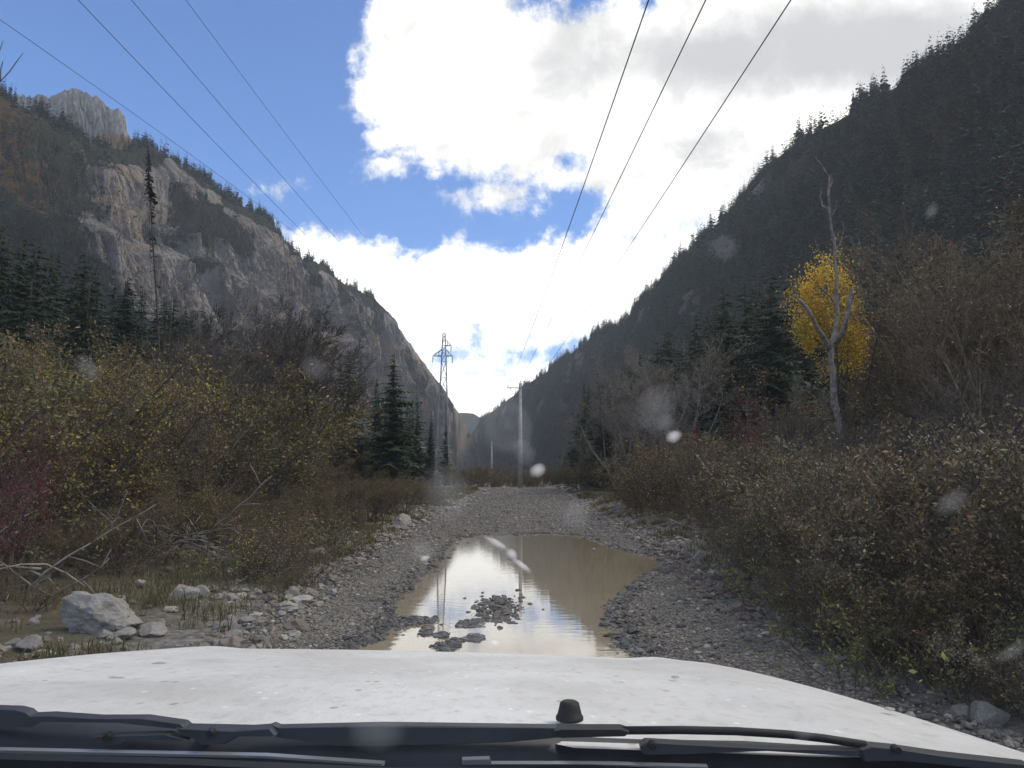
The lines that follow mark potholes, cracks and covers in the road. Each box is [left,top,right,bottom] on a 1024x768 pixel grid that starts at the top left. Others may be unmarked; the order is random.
pothole [339,533,670,658]
